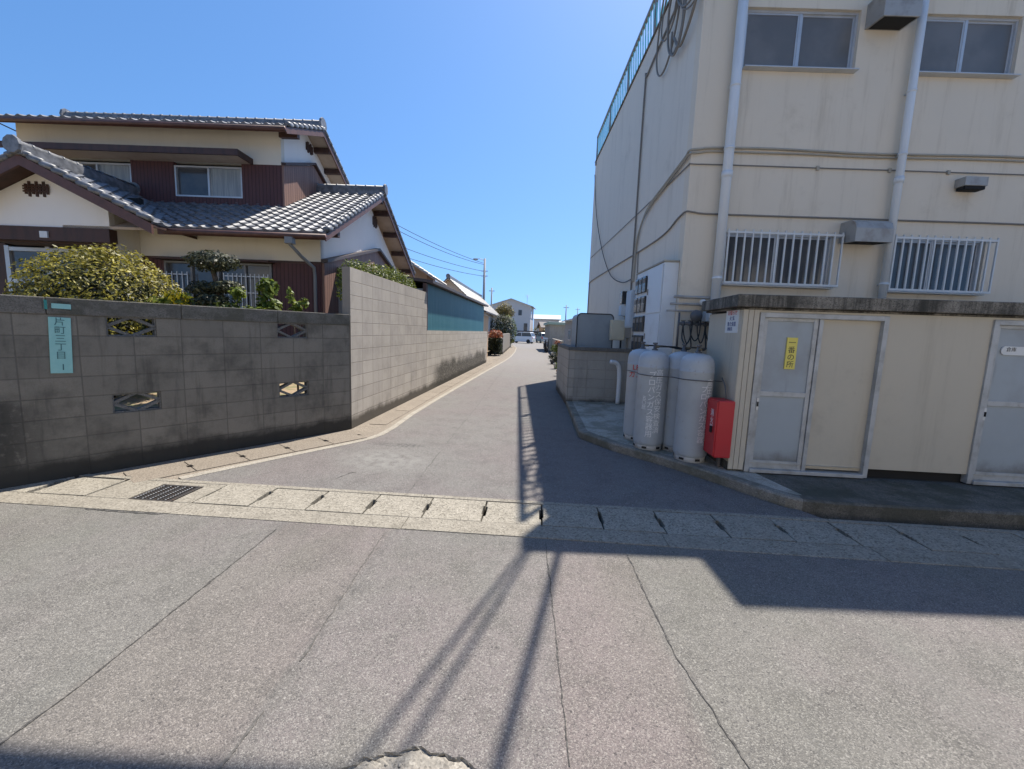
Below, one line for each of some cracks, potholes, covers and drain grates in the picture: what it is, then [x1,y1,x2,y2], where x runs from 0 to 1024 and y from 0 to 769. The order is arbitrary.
crack [627,555,750,769]
crack [545,542,570,766]
drain grate [129,484,202,502]
pothole [341,746,476,769]
